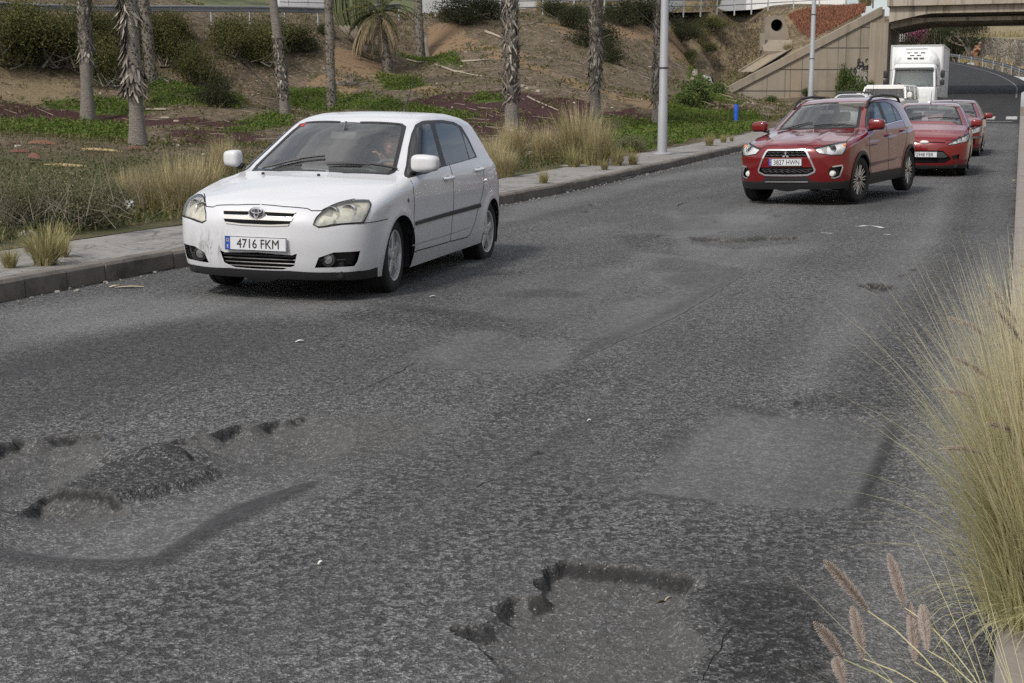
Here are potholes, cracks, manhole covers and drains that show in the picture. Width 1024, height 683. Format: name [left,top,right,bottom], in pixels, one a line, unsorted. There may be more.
crack [701,610,768,683]
pothole [855,283,900,294]
crack [350,363,526,395]
pothole [13,486,131,530]
pothole [0,433,104,498]
pothole [449,559,710,683]
pothole [689,236,802,247]
